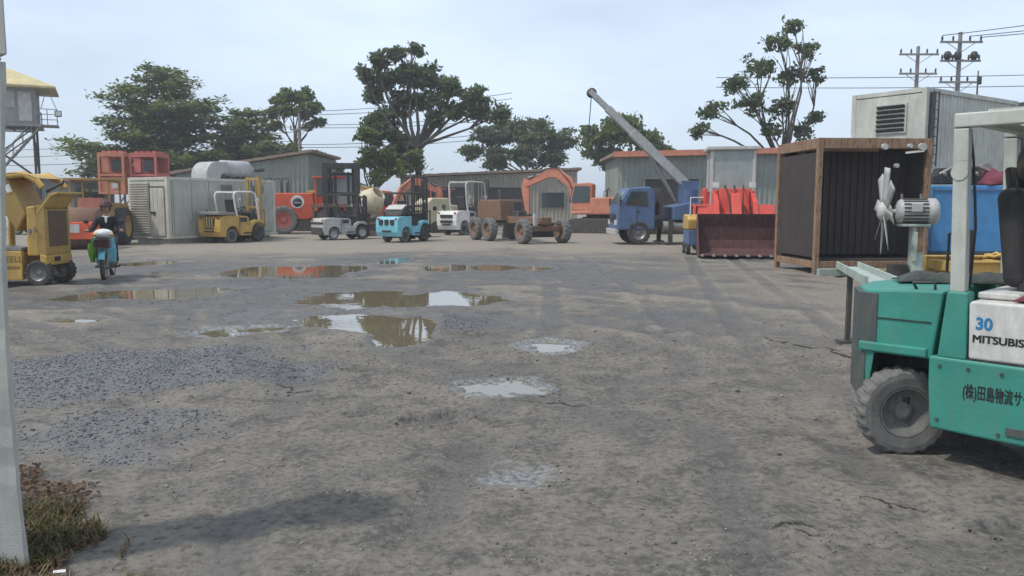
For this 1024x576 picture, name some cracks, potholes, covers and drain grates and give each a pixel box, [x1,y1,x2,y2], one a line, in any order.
pothole [266,307,447,355]
pothole [442,376,560,400]
pothole [464,459,561,492]
pothole [185,262,380,281]
crack [771,521,821,536]
pothole [271,287,537,311]
pothole [507,336,593,356]
crack [764,336,851,358]
pothole [414,262,562,274]
crack [859,496,929,512]
